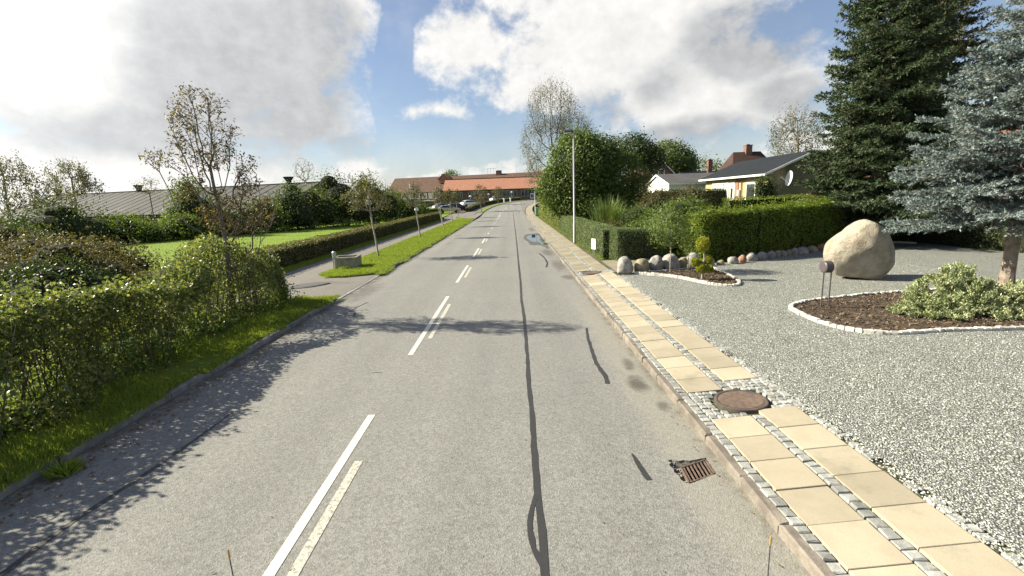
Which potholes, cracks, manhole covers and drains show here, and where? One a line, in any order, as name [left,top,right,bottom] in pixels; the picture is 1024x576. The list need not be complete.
manhole cover [714,389,769,414]
drain grate [680,459,715,484]
